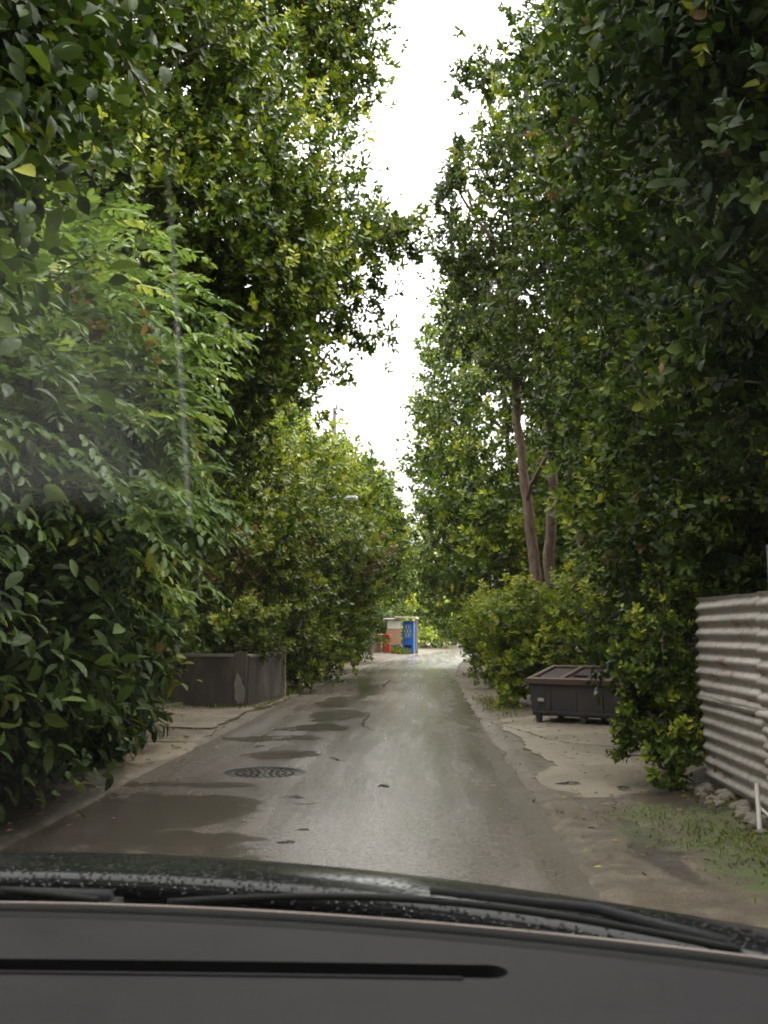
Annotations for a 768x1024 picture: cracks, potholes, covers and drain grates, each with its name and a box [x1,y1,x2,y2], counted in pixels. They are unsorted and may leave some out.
manhole cover [223,766,306,778]
crack [503,725,633,748]
